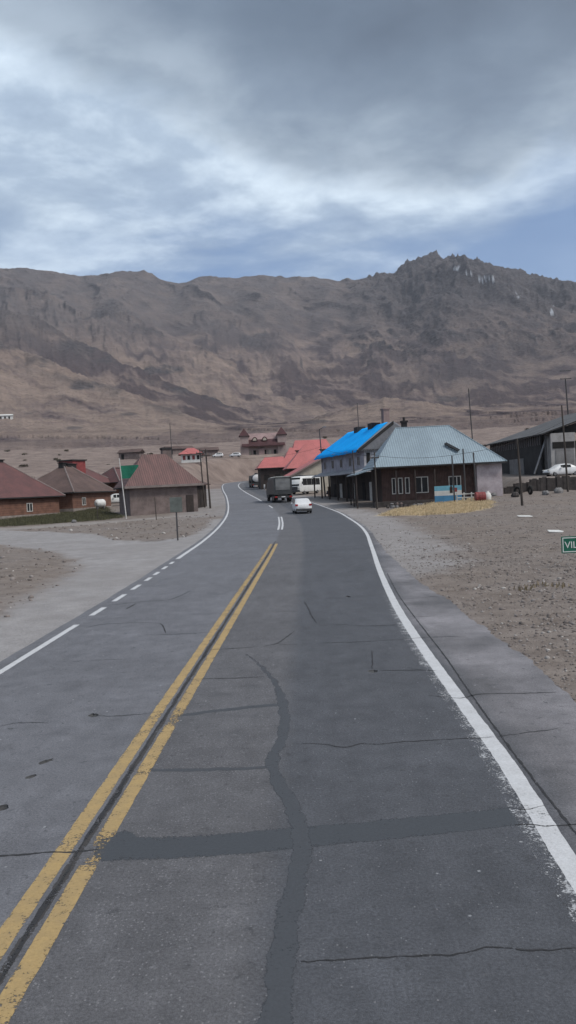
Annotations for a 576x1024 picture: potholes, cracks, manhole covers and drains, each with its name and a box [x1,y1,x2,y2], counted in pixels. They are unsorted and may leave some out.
crack [305,946,576,962]
crack [90,573,576,833]
